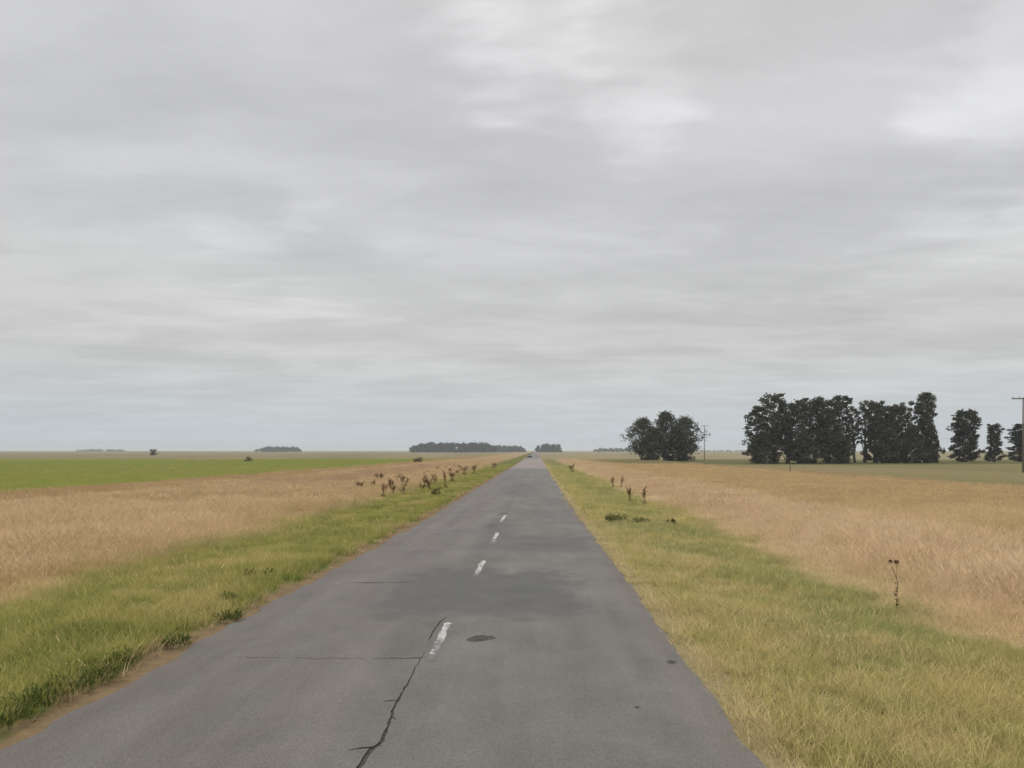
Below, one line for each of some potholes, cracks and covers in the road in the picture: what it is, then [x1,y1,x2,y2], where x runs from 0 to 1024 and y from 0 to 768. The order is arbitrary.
crack [247,618,445,768]
